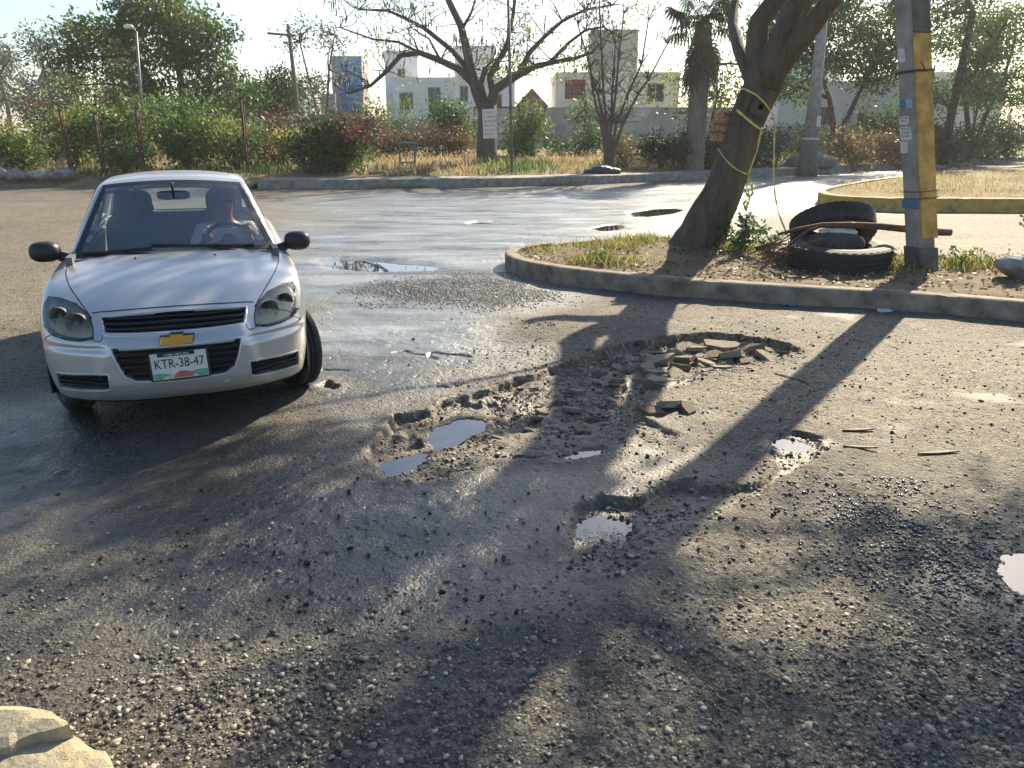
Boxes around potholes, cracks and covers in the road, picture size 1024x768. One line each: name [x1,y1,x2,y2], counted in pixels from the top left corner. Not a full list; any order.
pothole [307,255,455,274]
pothole [362,346,685,484]
pothole [633,332,804,401]
pothole [556,429,833,577]
pothole [623,206,690,217]
pothole [983,550,1024,590]
